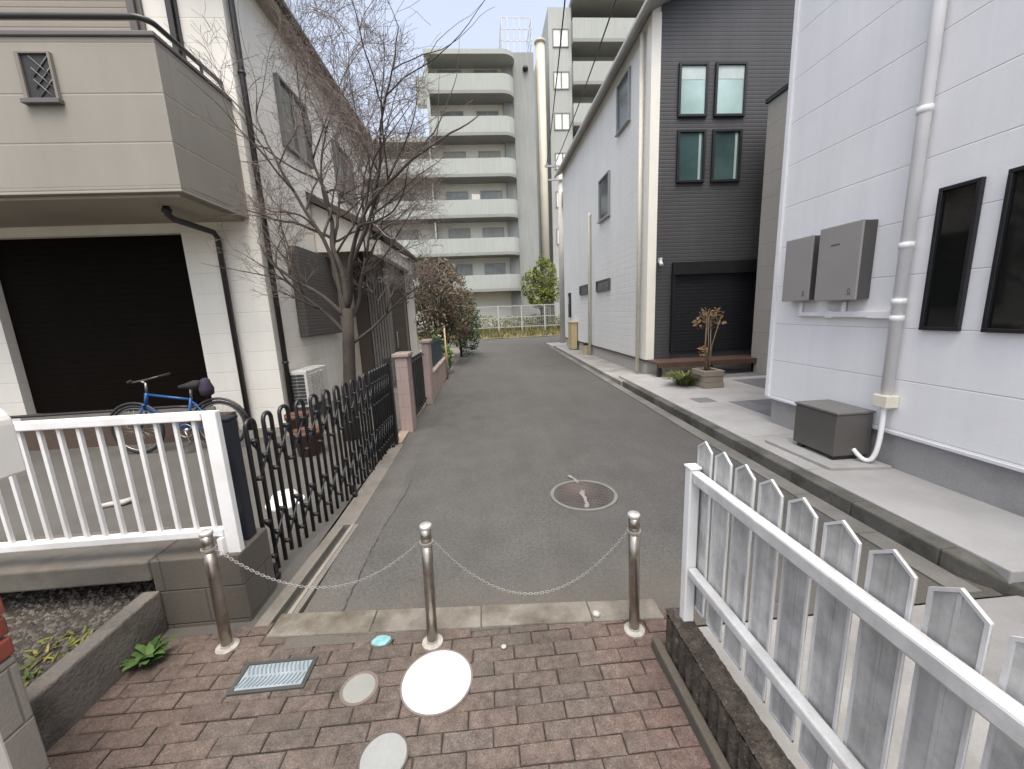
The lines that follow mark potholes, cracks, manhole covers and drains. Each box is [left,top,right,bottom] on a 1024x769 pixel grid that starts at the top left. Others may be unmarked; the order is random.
utility cover [400,649,473,719]
utility cover [370,634,393,649]
utility cover [339,671,379,709]
manhole cover [550,475,618,512]
utility cover [357,731,409,769]
